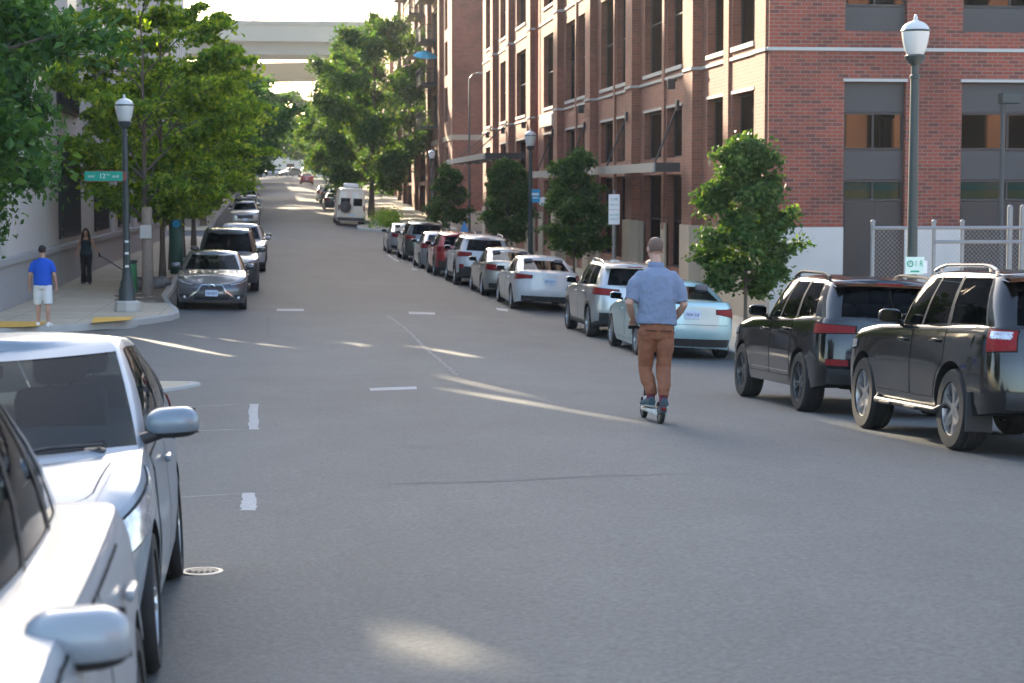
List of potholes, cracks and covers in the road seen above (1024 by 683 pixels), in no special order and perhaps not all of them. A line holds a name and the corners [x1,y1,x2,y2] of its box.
crack [372,473,665,485]
crack [388,316,459,375]
